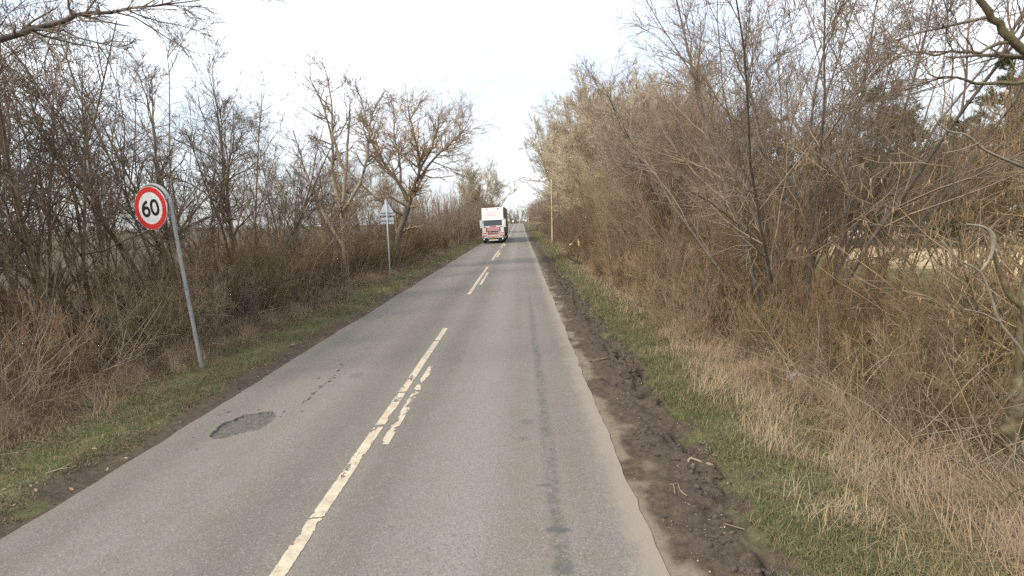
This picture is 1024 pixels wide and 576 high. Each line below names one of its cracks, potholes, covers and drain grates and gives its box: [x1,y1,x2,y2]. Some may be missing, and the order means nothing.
pothole [192,409,304,450]
